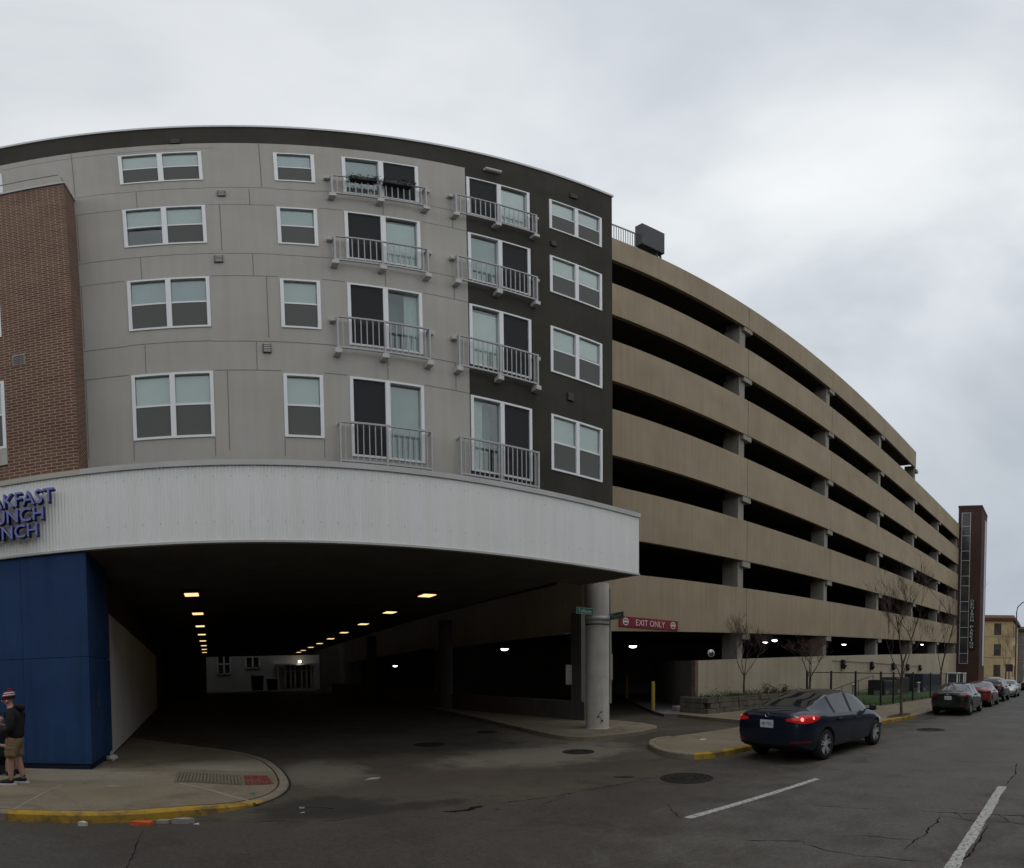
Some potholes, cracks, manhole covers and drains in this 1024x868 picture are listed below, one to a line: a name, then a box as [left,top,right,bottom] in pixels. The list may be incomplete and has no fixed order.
manhole cover [660,773,713,784]
